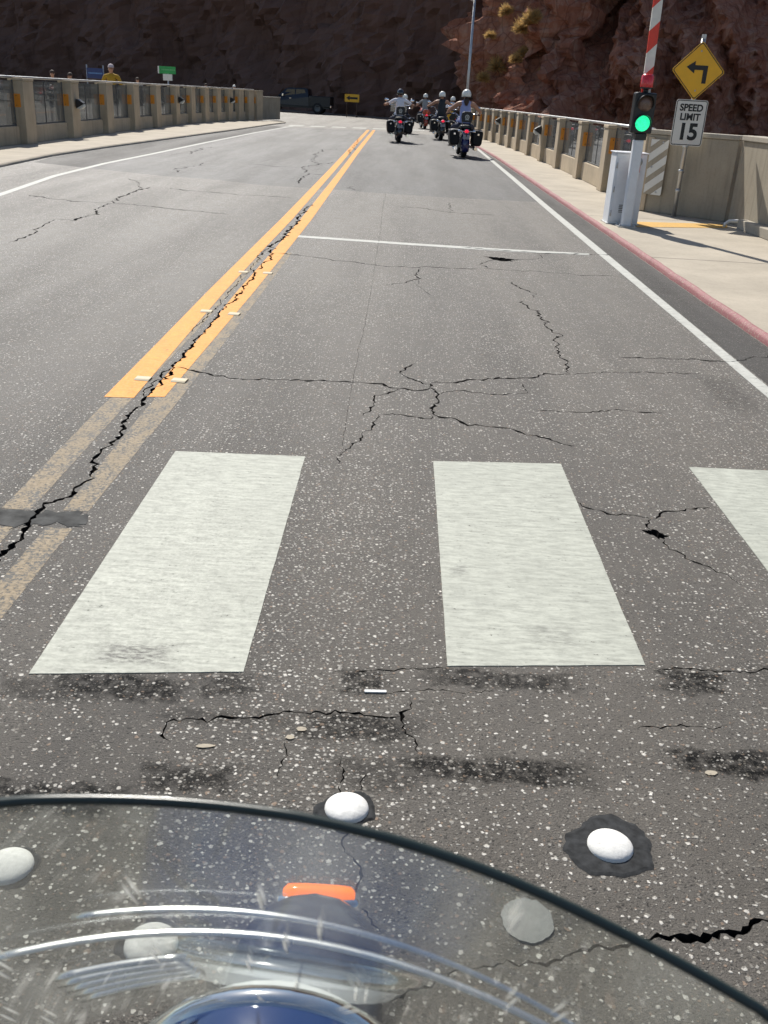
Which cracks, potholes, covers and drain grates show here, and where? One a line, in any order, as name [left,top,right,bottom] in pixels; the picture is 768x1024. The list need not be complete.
crack [9,179,223,243]
pothole [642,529,669,540]
crack [578,502,741,585]
crack [0,205,699,561]
crack [244,141,358,184]
crack [160,667,492,758]
